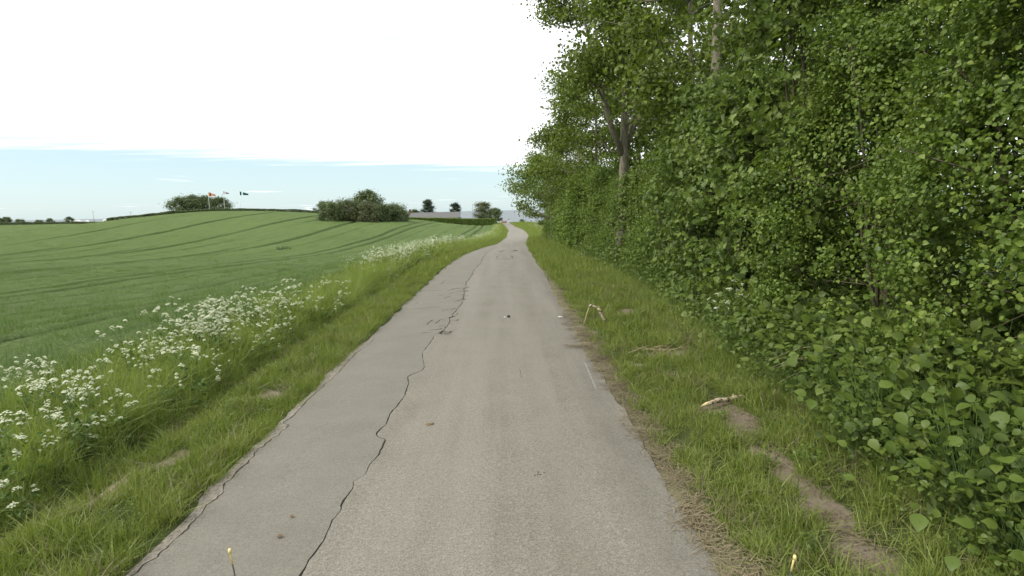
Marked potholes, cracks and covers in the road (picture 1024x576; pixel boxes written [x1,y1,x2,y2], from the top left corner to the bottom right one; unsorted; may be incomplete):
crack [299,247,518,576]
crack [130,337,374,576]
